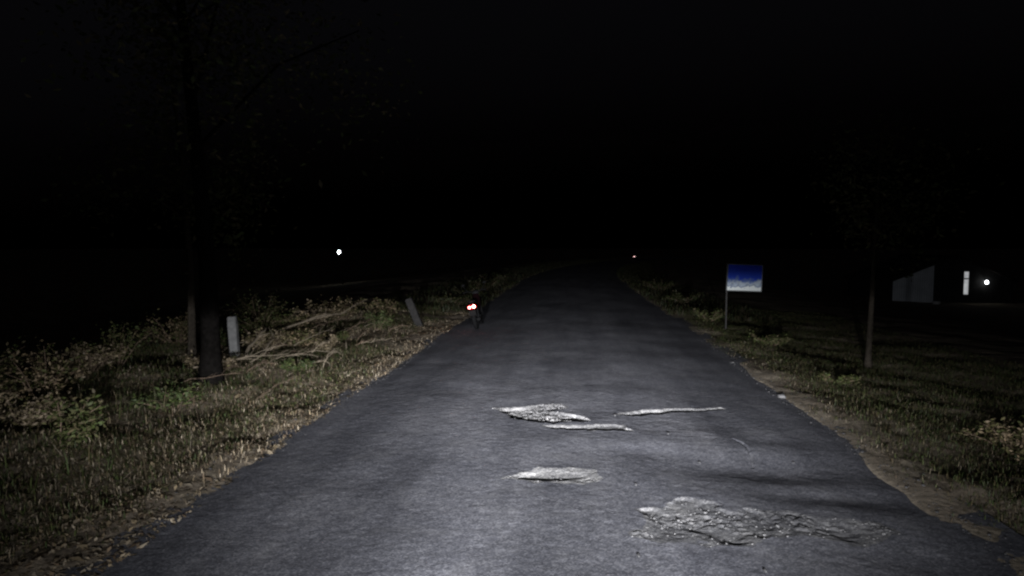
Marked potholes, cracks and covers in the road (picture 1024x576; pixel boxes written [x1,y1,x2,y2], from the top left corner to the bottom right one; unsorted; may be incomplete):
crack [732,438,755,469]
pothole [501,467,603,485]
pothole [628,497,901,548]
pothole [492,403,590,424]
